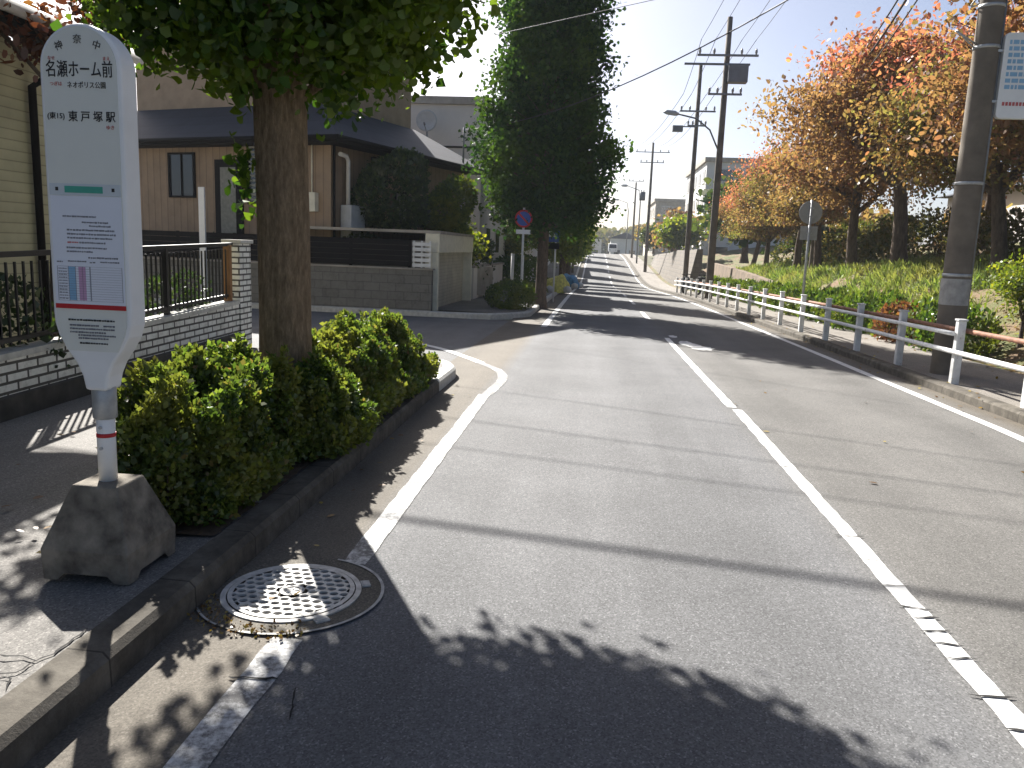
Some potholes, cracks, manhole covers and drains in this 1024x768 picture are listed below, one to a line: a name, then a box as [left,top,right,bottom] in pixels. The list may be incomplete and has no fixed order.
crack [0,629,86,689]
manhole cover [187,557,384,640]
